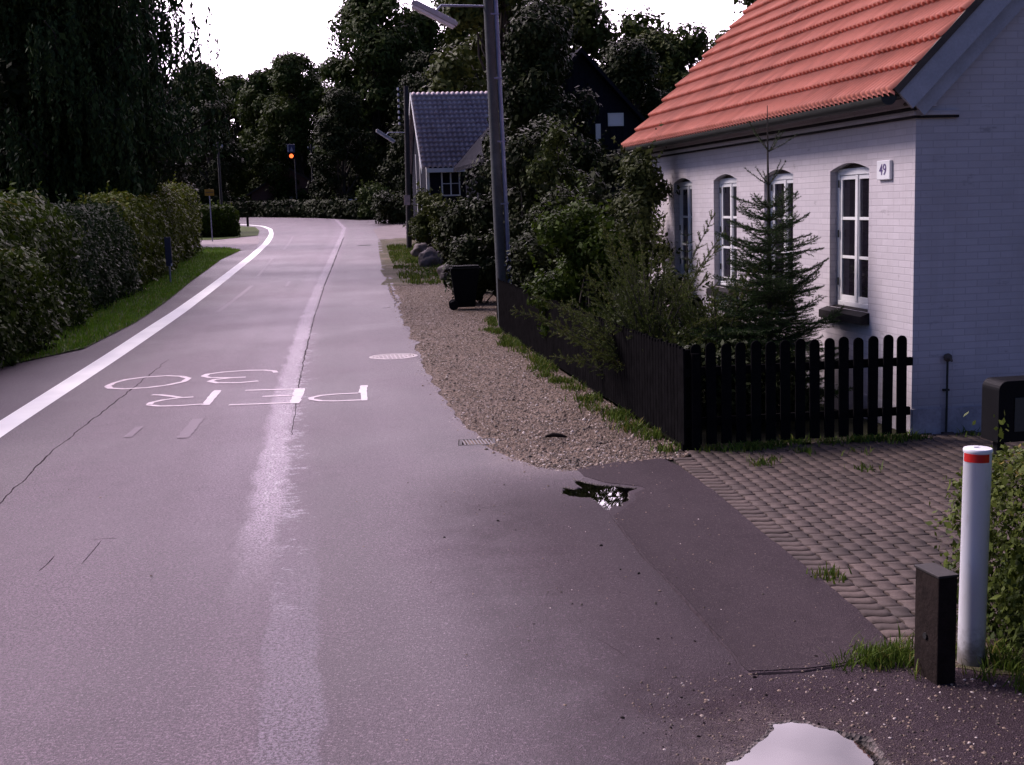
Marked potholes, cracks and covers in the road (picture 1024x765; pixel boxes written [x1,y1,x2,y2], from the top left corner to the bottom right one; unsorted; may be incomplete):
pothole [721,719,892,765]
pothole [560,478,637,510]
crack [0,363,163,504]
drain grate [459,438,496,446]
